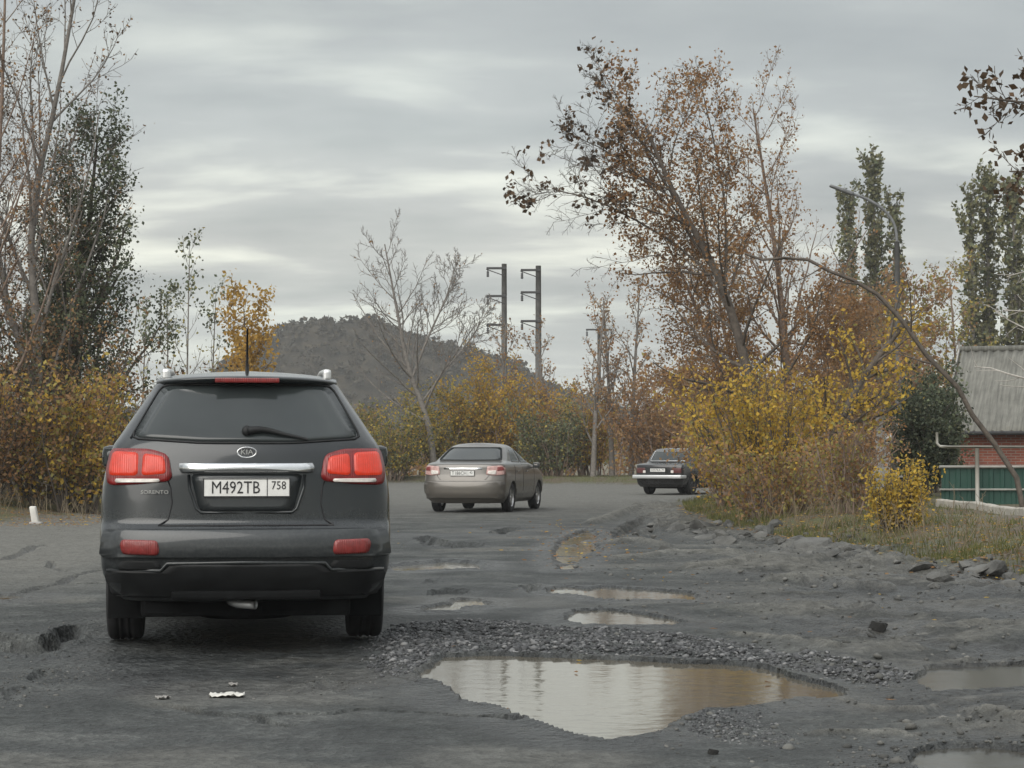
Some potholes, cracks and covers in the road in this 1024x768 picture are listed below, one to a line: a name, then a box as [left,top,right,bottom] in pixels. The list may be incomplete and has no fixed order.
pothole [485,526,524,534]
pothole [607,516,668,540]
pothole [563,607,689,625]
pothole [906,739,1024,767]
pothole [545,584,702,600]
pothole [912,660,1024,691]
pothole [388,558,491,571]
pothole [427,587,471,596]
pothole [420,597,494,611]
pothole [412,535,488,548]
pothole [0,624,94,659]
crack [0,544,106,594]
